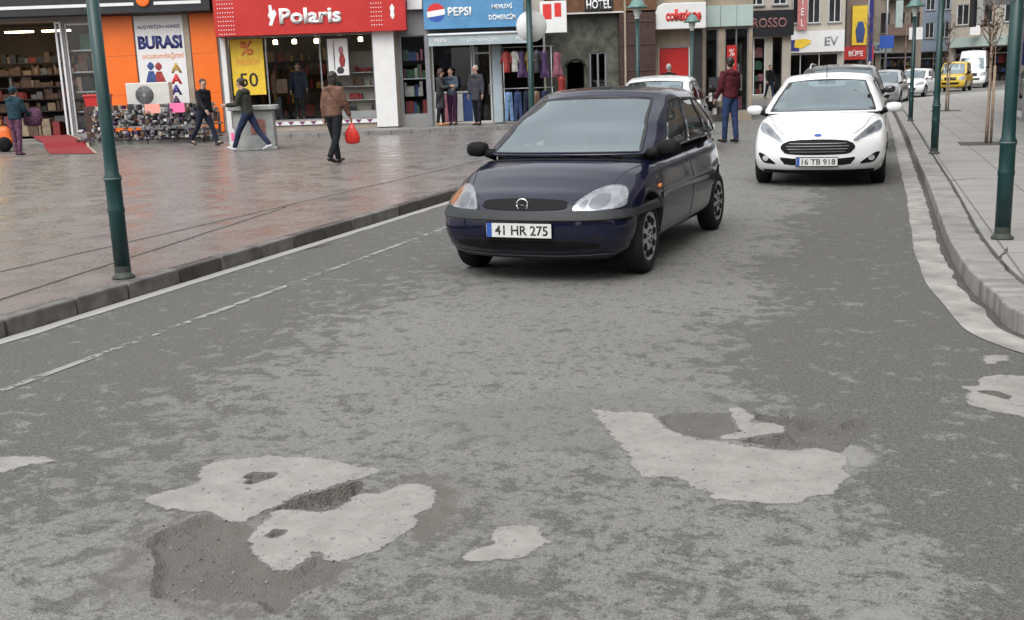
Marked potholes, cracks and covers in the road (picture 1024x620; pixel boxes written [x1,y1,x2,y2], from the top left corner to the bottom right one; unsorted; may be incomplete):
pothole [244,473,277,484]
pothole [728,407,892,459]
pothole [658,409,736,439]
pothole [242,479,385,521]
pothole [122,512,362,617]
